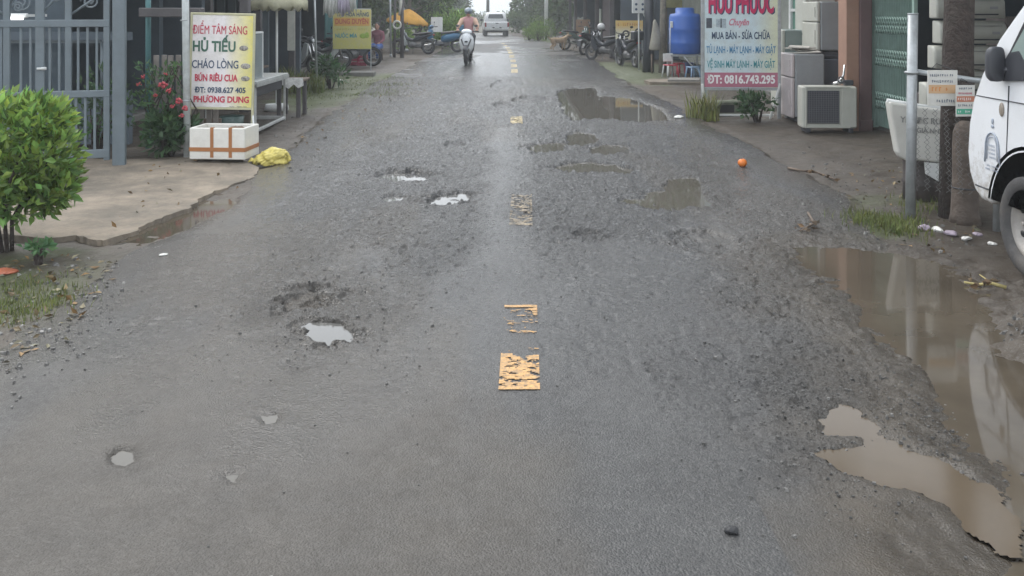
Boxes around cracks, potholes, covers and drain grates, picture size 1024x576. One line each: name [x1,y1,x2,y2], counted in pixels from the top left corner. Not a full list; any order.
pothole [589,142,635,155]
pothole [554,86,673,123]
pothole [612,175,714,211]
pothole [545,159,636,174]
pothole [423,189,481,205]
pothole [301,315,358,347]
pothole [525,140,568,154]
pothole [373,167,438,182]
pothole [277,281,343,313]
pothole [103,442,151,469]
